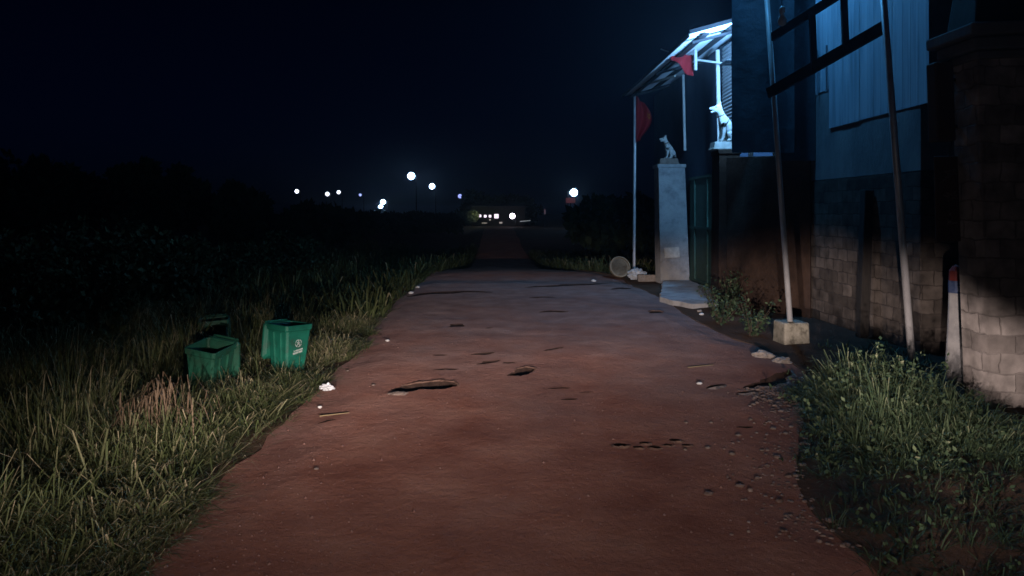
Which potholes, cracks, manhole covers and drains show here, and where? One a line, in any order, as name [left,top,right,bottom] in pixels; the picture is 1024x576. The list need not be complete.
pothole [391,379,460,392]
crack [525,283,631,312]
pothole [507,366,537,376]
